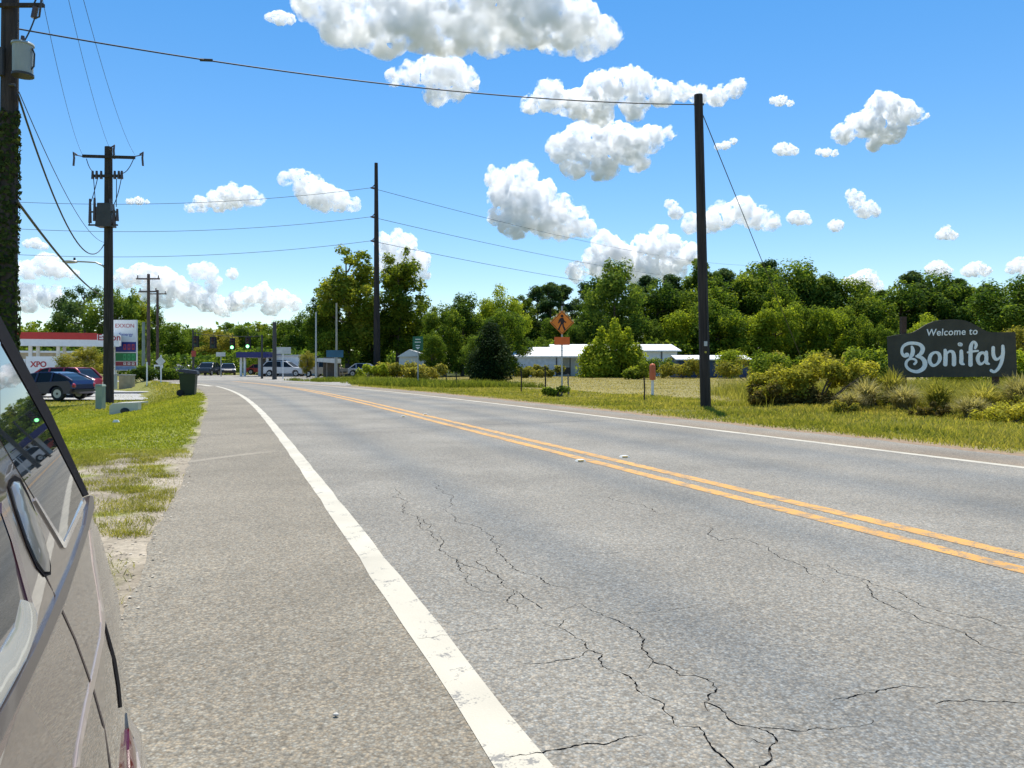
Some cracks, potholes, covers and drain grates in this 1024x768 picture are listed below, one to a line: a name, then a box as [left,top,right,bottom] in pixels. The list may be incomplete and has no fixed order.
crack [387,485,873,768]
crack [839,686,1017,704]
crack [706,525,1021,655]
